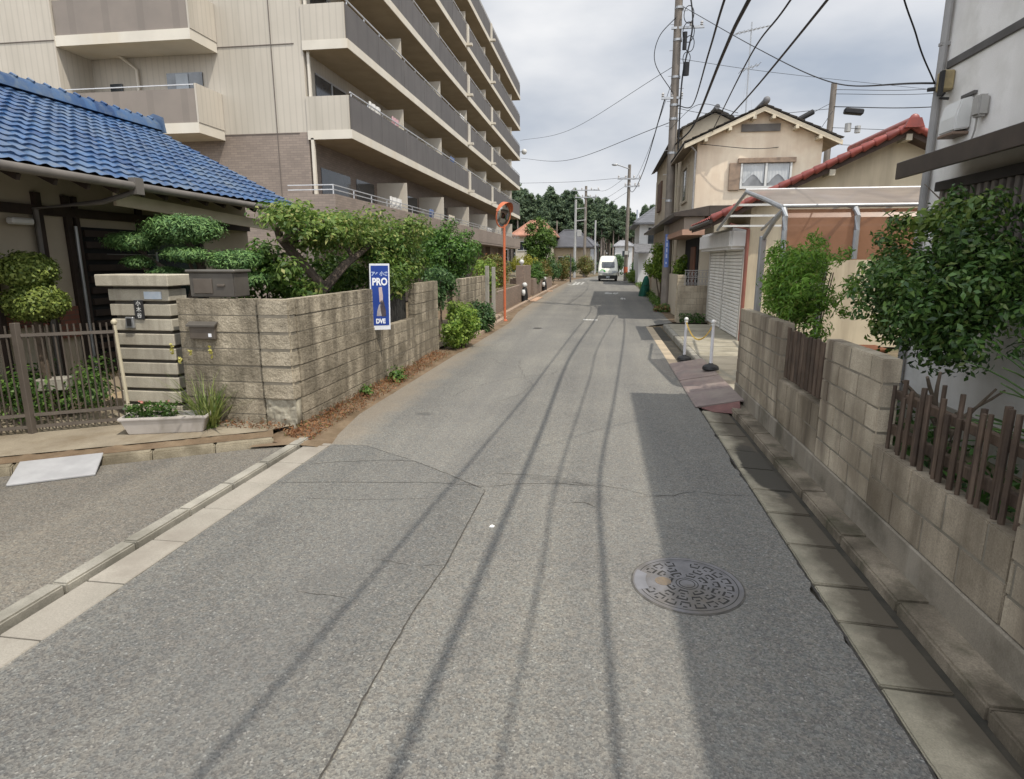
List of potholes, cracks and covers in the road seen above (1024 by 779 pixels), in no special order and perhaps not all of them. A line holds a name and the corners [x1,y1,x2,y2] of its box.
manhole cover [631,557,746,616]
